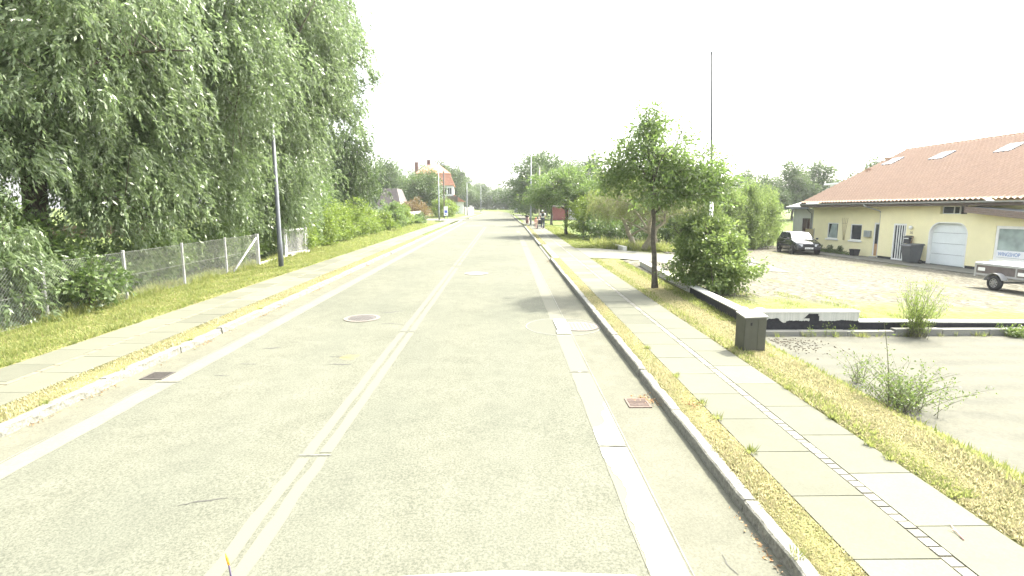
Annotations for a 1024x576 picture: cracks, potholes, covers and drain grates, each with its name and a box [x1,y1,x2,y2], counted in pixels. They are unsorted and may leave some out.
drain grate [624,398,652,408]
manhole cover [343,314,380,322]
drain grate [139,372,176,380]
manhole cover [526,318,601,336]
